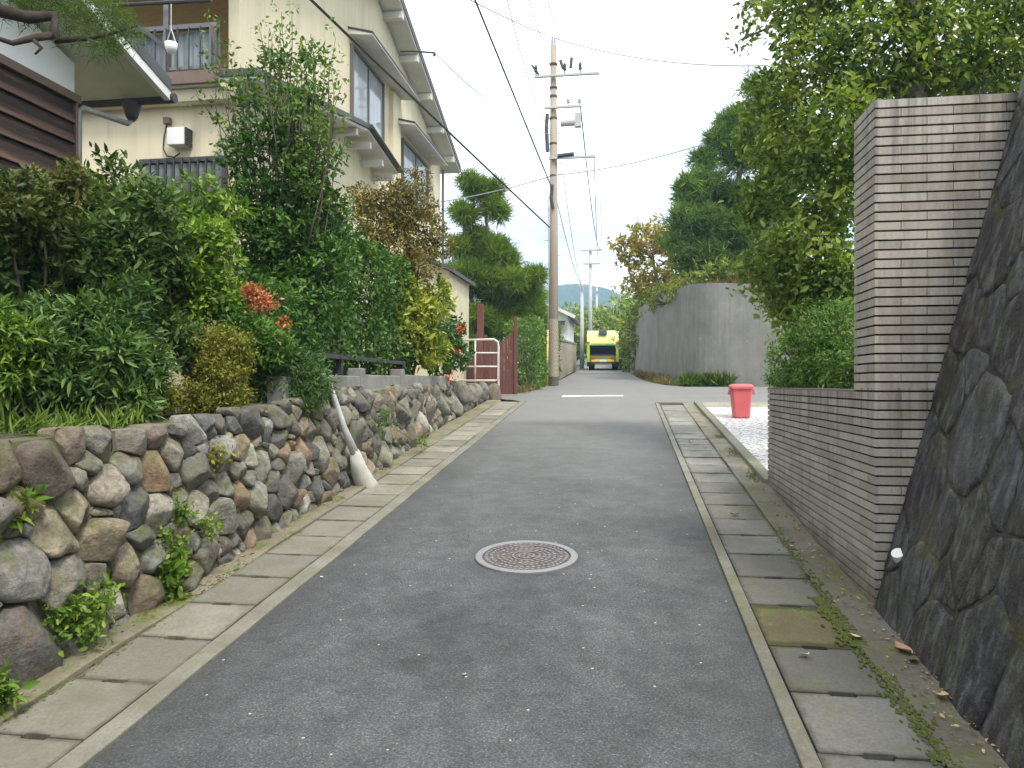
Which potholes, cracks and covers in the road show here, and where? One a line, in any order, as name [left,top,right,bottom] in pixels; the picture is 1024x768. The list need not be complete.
manhole cover [475,540,578,574]
